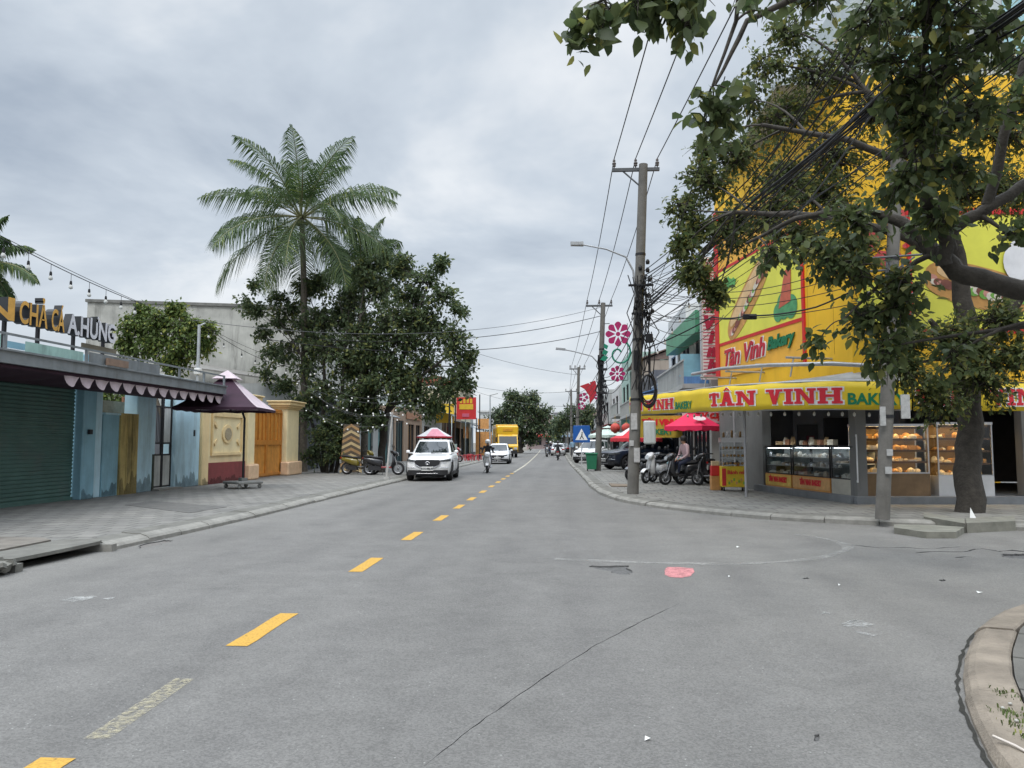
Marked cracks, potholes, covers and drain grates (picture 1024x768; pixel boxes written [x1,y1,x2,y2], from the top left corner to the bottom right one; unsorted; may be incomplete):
crack [428,608,669,763]
crack [855,545,1024,558]
pothole [589,565,632,574]
